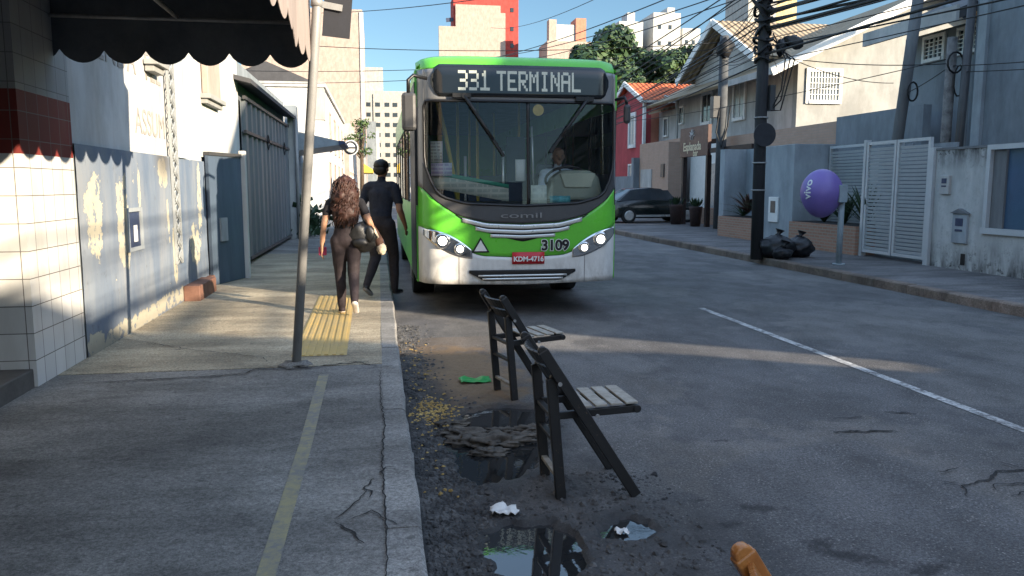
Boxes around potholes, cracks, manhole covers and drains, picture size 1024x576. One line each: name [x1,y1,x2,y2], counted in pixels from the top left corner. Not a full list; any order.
pothole [441,402,565,487]
crack [334,466,397,543]
crack [833,411,917,432]
pothole [593,512,666,541]
crack [936,462,1024,496]
pothole [477,515,595,576]
